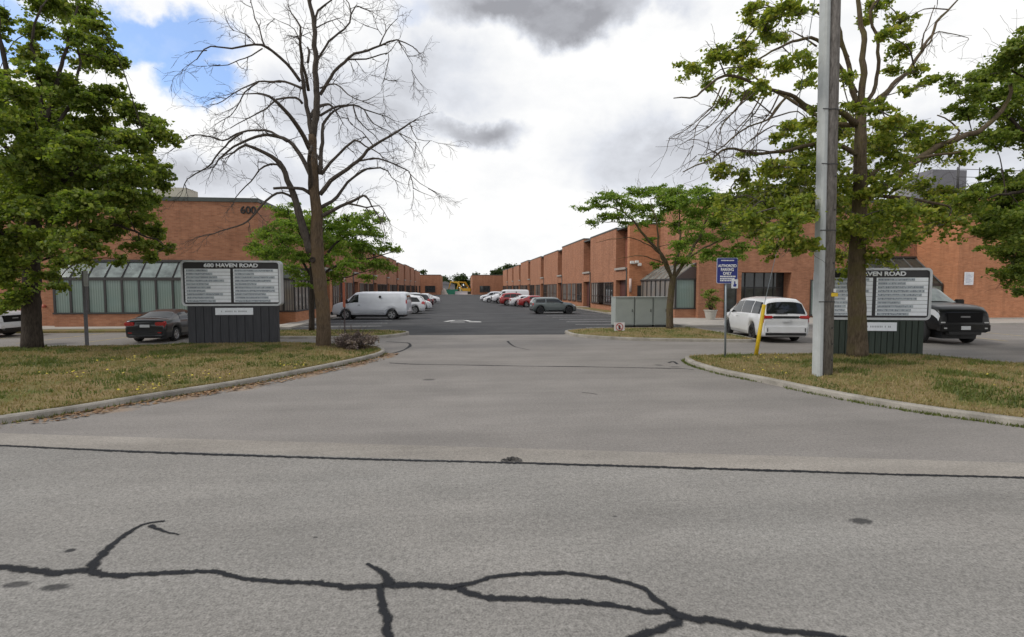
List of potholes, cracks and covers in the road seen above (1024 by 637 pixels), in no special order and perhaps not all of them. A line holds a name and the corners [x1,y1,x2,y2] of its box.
crack [395,341,693,370]
